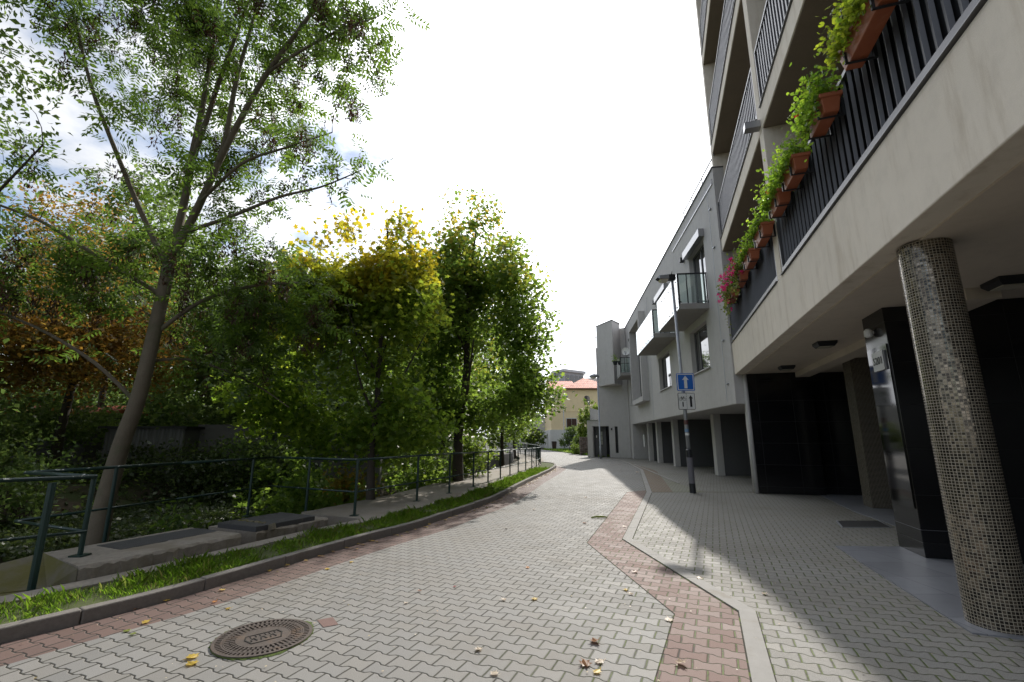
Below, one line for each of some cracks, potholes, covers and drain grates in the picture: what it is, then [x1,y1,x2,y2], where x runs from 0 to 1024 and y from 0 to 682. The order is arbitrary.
manhole cover [208,619,314,660]
